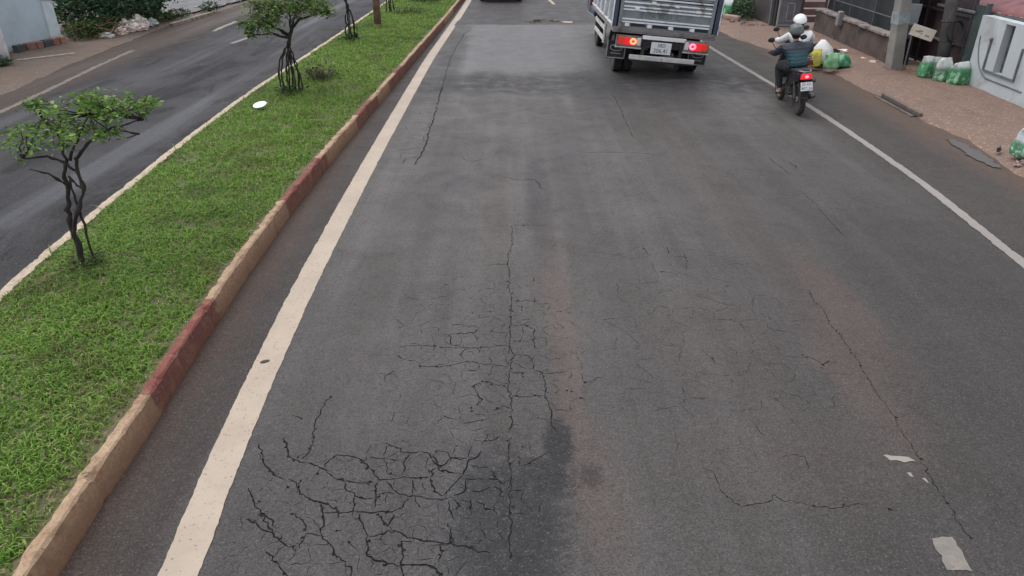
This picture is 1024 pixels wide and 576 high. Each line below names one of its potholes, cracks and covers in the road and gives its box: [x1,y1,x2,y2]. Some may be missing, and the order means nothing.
crack [577,246,973,539]
crack [400,32,479,183]
crack [224,225,602,576]
